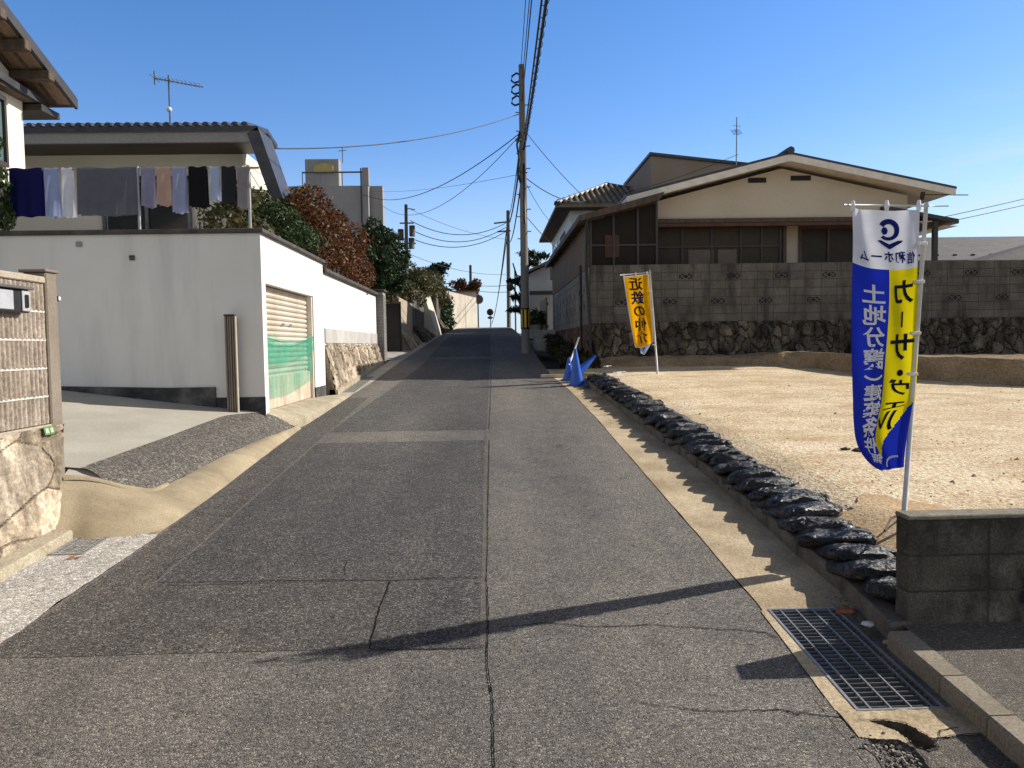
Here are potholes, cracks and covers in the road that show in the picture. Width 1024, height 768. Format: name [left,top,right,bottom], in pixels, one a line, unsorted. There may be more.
crack [507,622,777,637]
drain grate [768,607,945,739]
pothole [868,718,940,751]
crack [641,702,843,718]
crack [213,560,477,649]
